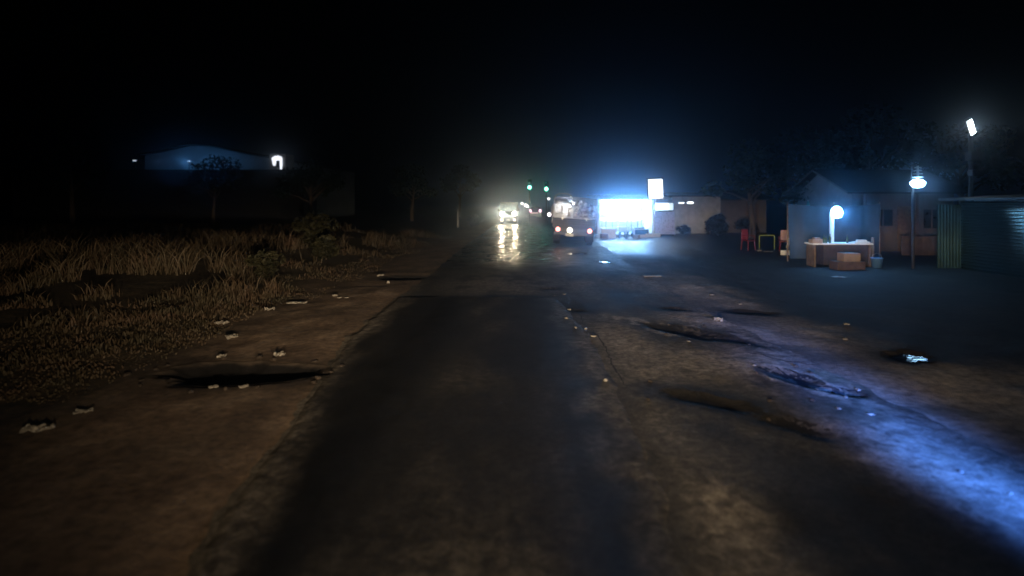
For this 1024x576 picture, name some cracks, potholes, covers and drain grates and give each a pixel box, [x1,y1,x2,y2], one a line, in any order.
pothole [828,387,871,398]
pothole [880,349,938,363]
pothole [753,365,854,398]
pothole [658,389,777,418]
pothole [744,413,831,441]
pothole [143,360,330,388]
pothole [640,323,764,348]
